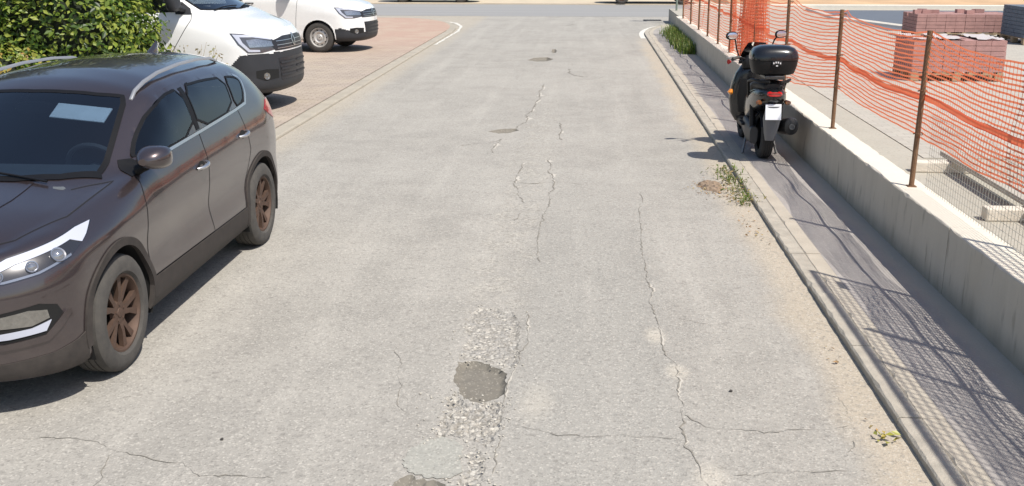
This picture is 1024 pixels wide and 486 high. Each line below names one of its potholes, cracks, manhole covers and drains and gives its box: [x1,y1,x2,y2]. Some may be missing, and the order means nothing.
crack [513,160,583,261]
pothole [392,475,446,486]
pothole [453,361,507,403]
crack [638,194,845,486]
crack [23,437,269,486]
crack [492,314,672,473]
crack [461,86,545,153]
